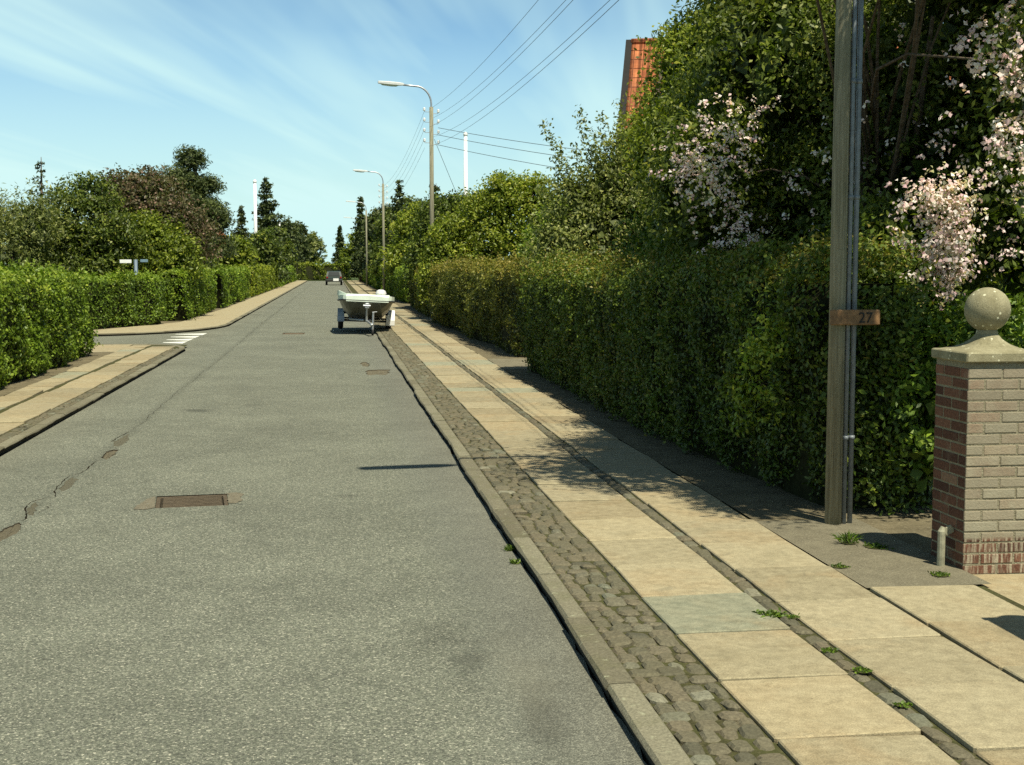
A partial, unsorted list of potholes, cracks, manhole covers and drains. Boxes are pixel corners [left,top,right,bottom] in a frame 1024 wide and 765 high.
crack [22,306,284,521]
manhole cover [134,492,243,509]
